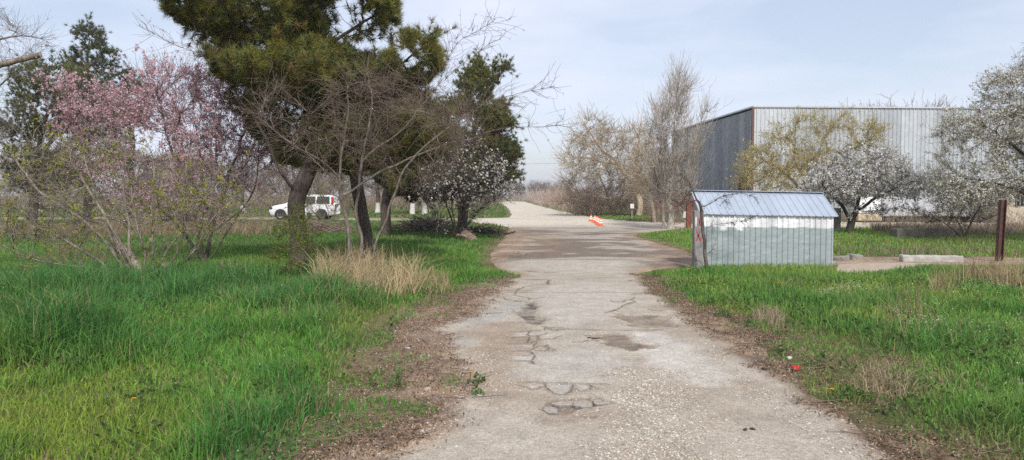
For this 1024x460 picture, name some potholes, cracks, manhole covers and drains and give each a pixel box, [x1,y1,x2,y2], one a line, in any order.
pothole [526,394,626,420]
crack [492,271,556,302]
pothole [503,299,555,329]
crack [506,292,673,364]
